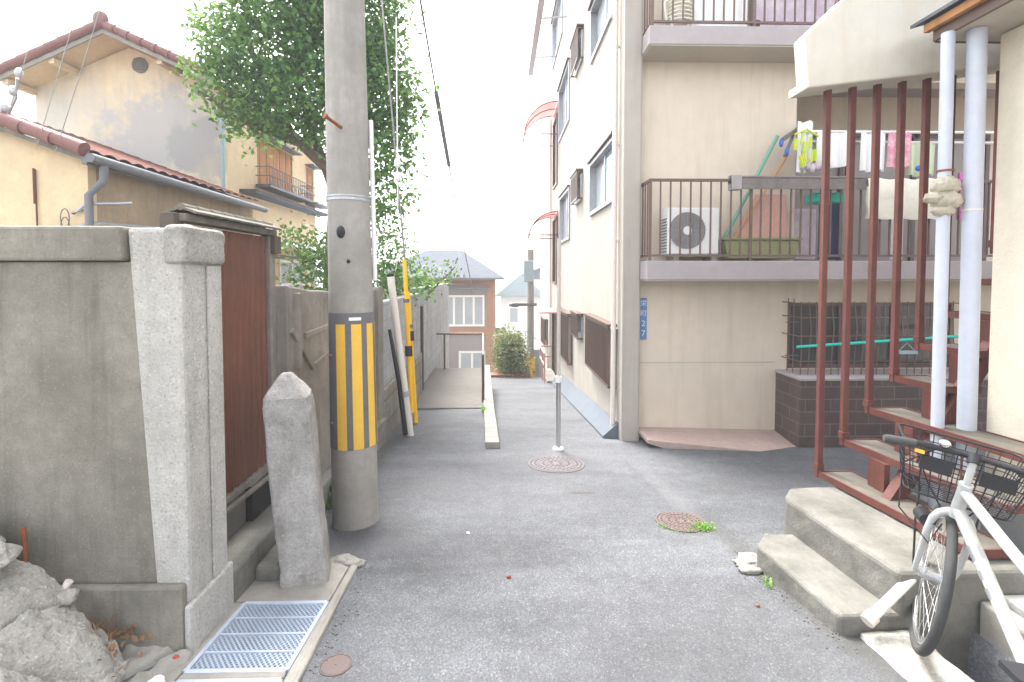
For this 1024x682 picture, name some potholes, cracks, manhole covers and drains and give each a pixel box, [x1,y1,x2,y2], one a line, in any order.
drain grate [183,600,329,675]
manhole cover [528,455,585,473]
utility cover [319,653,353,677]
manhole cover [655,511,706,533]
